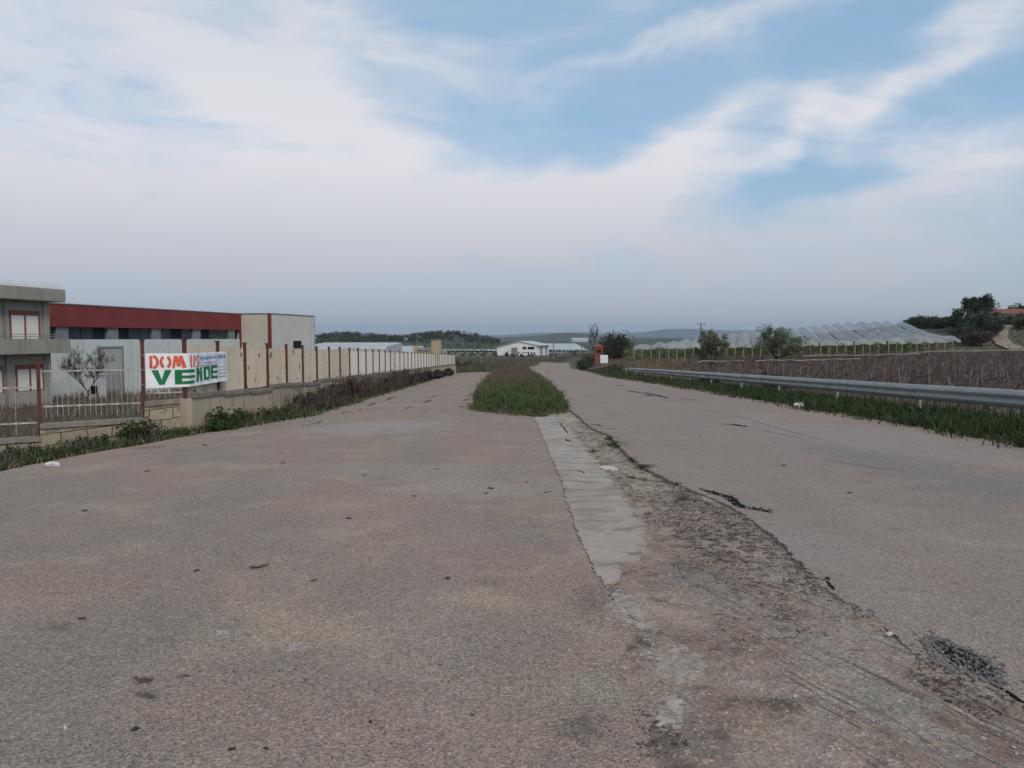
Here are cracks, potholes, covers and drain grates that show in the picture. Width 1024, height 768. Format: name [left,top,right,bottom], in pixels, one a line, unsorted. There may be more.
crack [619,385,668,398]
pothole [909,627,1024,694]
crack [687,399,831,442]
crack [699,488,773,513]
